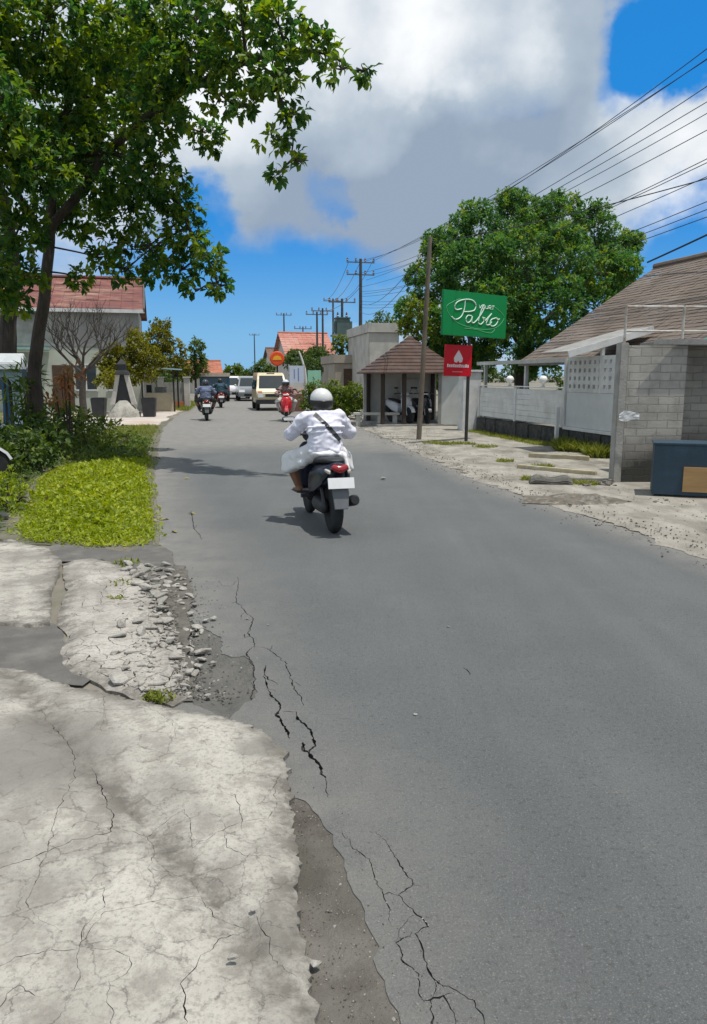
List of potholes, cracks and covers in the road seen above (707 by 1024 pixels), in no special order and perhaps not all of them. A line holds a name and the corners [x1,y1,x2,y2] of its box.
crack [221,577,328,797]
crack [1,703,288,1024]
crack [342,834,485,1024]
pothole [290,798,401,1024]
